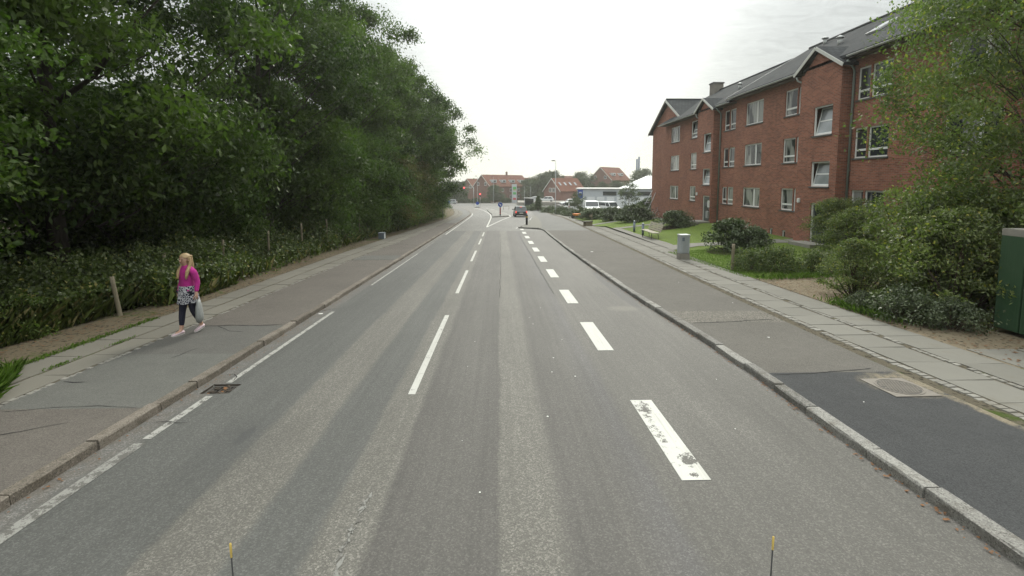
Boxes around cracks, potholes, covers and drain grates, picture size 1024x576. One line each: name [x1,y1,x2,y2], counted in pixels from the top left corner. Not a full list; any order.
drain grate [200,384,241,394]
manhole cover [860,378,942,397]
crack [214,324,280,332]
